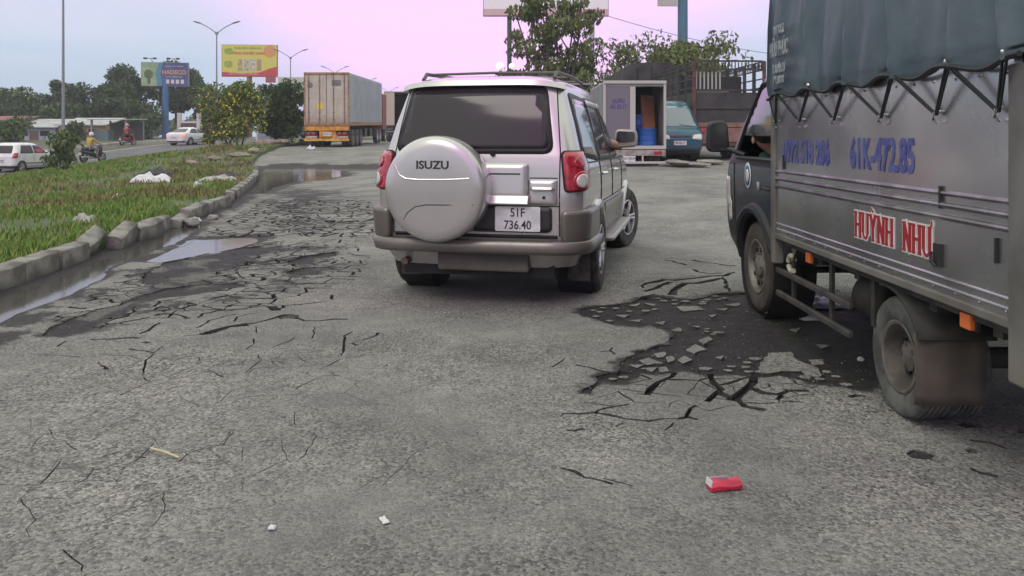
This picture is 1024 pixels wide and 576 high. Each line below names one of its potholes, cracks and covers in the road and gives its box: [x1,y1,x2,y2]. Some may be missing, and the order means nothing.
crack [207,200,375,238]
pothole [906,449,934,459]
crack [560,467,632,486]
pothole [580,293,878,394]
crack [0,239,405,572]
crack [638,260,742,300]
